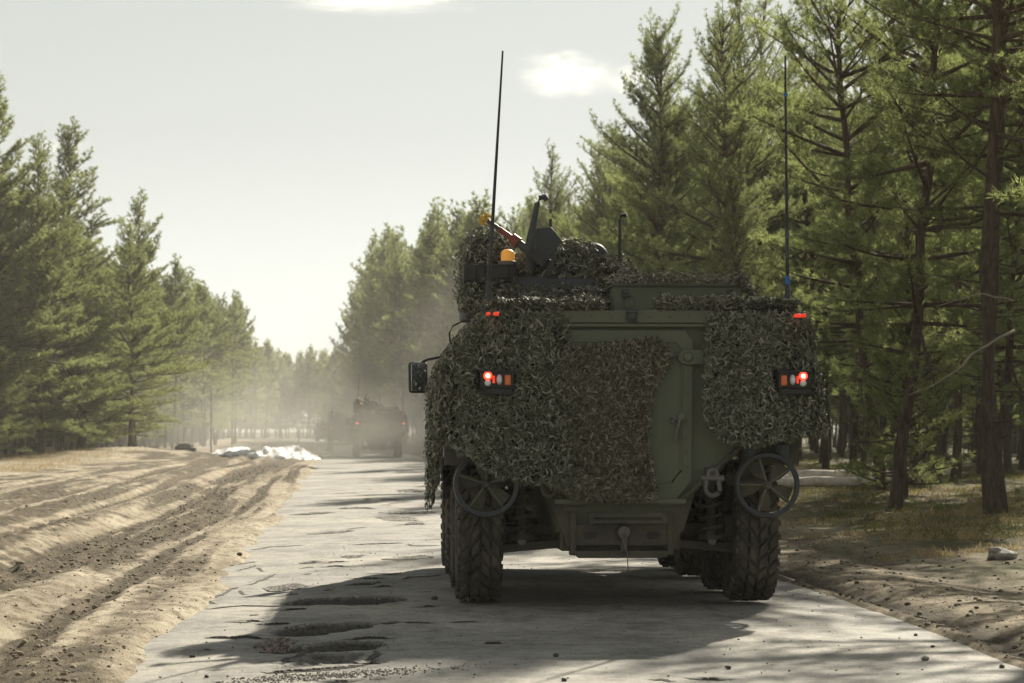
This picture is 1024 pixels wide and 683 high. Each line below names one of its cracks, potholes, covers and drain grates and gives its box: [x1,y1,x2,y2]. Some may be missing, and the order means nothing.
crack [203,545,478,682]
pothole [254,637,389,654]
pothole [263,583,314,592]
pothole [279,596,407,606]
pothole [270,621,379,637]
